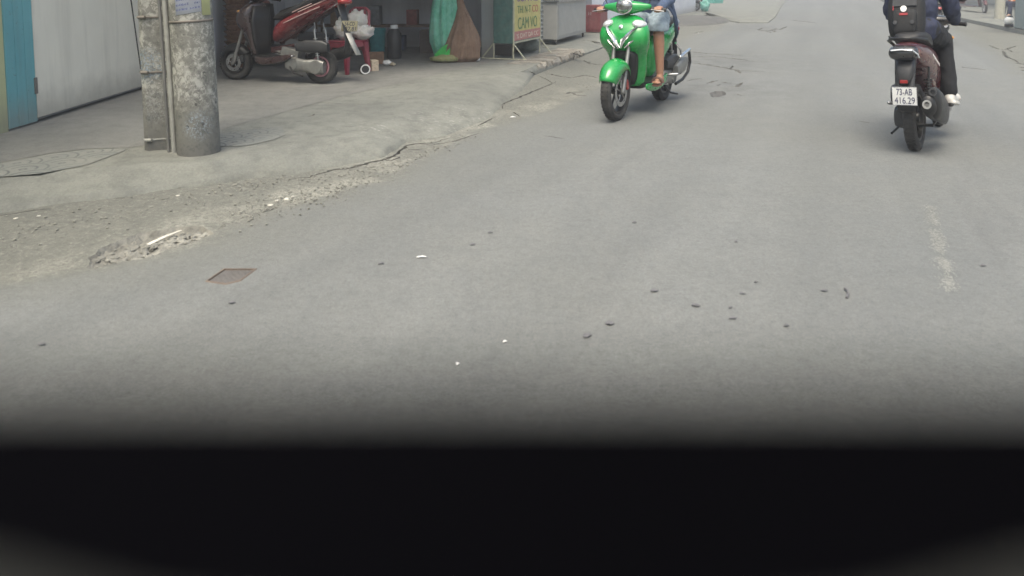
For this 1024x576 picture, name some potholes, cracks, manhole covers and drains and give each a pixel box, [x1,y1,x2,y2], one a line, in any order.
crack [989,45,1024,71]
manhole cover [205,268,257,285]
crack [294,40,600,179]
pothole [87,226,213,269]
crack [688,52,764,95]
